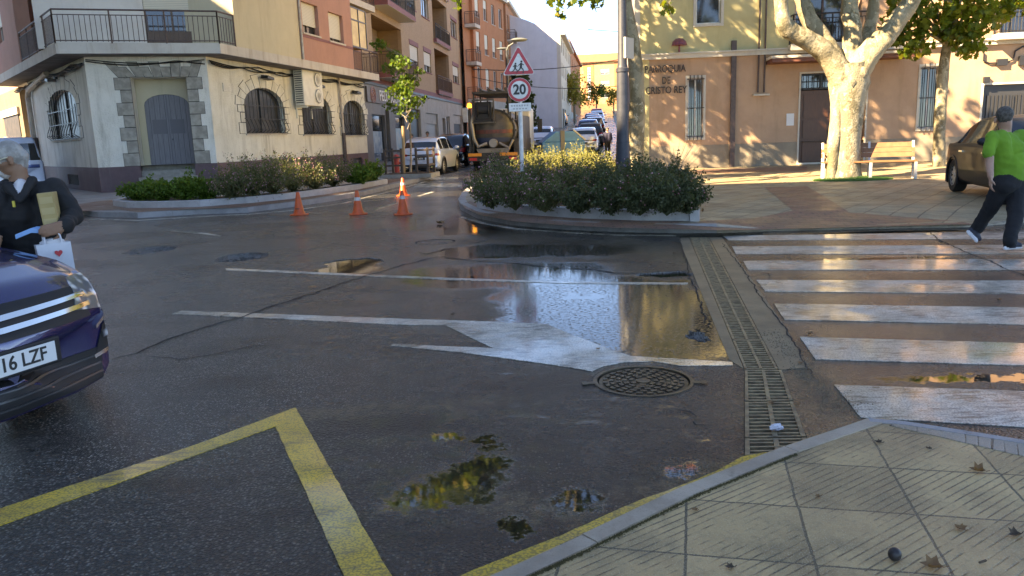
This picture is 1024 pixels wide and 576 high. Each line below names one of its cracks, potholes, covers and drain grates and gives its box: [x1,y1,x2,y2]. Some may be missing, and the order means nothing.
manhole cover [581,366,707,397]
crack [679,237,707,322]
drain grate [692,244,716,252]
drain grate [745,370,793,402]
drain grate [745,401,806,439]
drain grate [709,284,741,299]
drain grate [704,272,733,284]
crack [113,238,621,359]
drain grate [696,252,721,262]
drain grate [733,340,778,371]
pothole [321,257,384,268]
